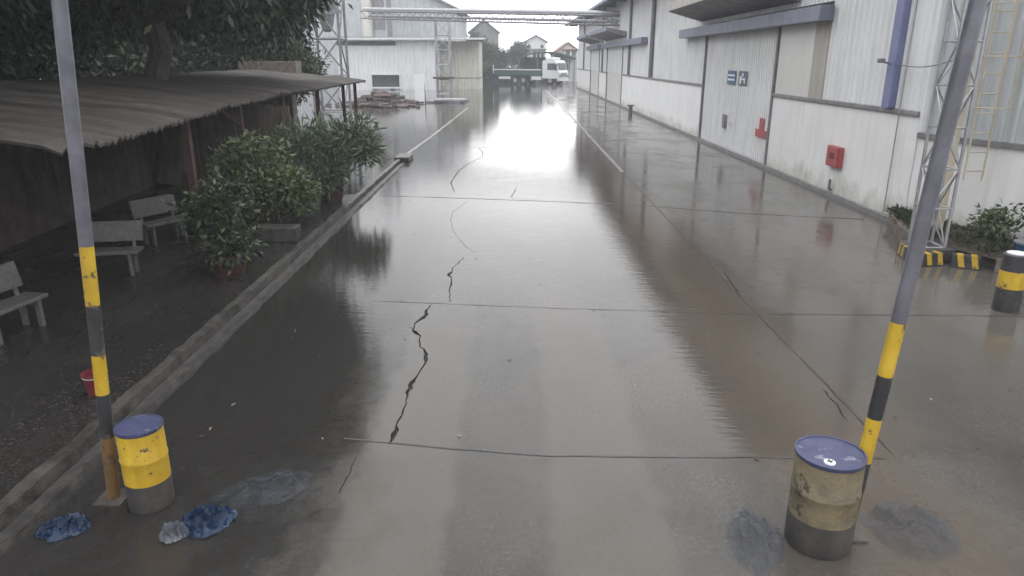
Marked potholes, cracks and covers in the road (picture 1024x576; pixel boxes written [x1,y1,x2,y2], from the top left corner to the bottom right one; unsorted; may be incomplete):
crack [389,148,483,444]
